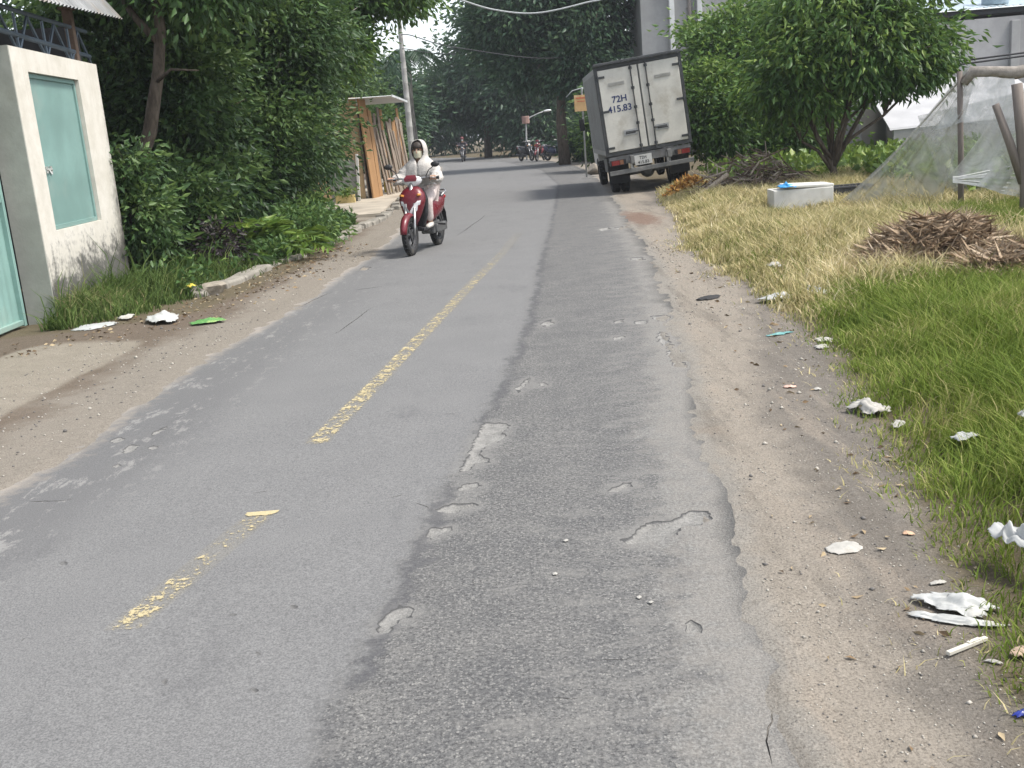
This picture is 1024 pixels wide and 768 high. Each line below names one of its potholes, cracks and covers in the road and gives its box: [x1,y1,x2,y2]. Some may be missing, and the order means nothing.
crack [765,714,773,763]
pothole [435,503,478,513]
pothole [619,511,713,545]
pothole [376,605,414,634]
pothole [459,422,511,472]
pothole [456,482,483,491]
pothole [685,620,702,633]
pothole [608,482,633,492]
pothole [425,527,452,540]
